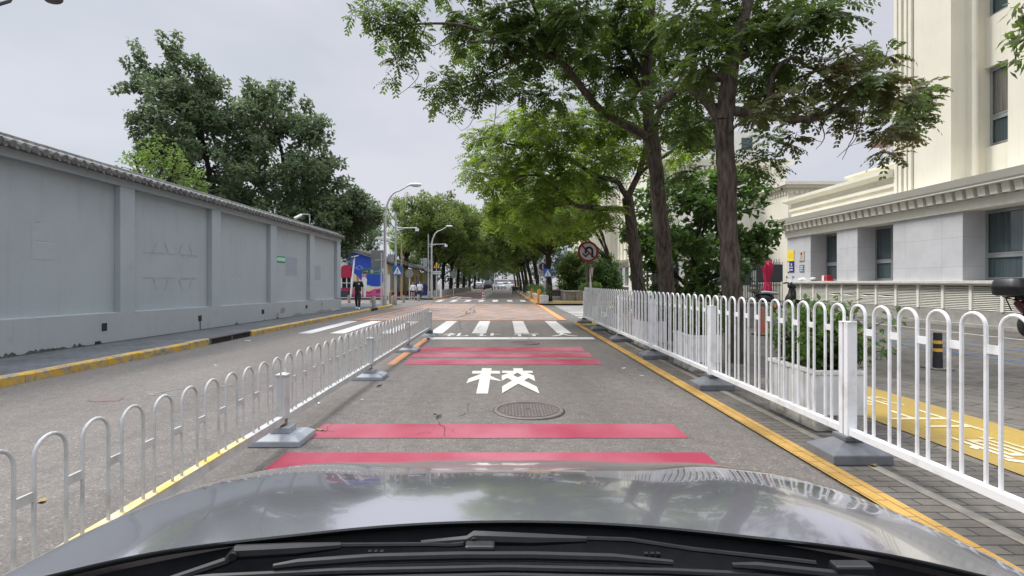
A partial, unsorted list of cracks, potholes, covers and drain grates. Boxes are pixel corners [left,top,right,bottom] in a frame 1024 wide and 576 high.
manhole cover [493,401,565,420]
drain grate [205,331,251,345]
